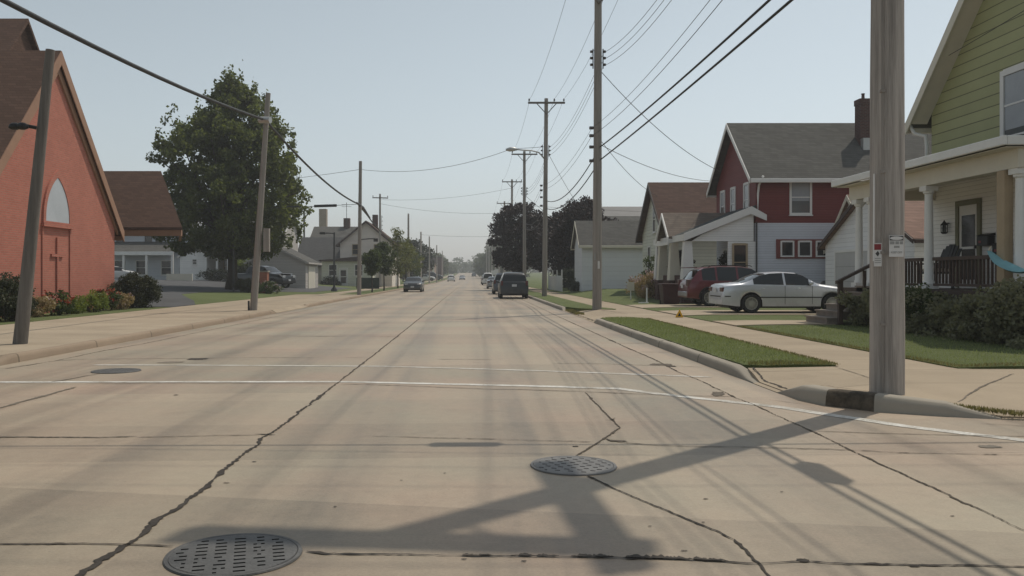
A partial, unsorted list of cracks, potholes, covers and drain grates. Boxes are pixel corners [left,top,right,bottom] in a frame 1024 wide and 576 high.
manhole cover [530,456,617,476]
manhole cover [163,533,303,576]
crack [586,475,771,576]
